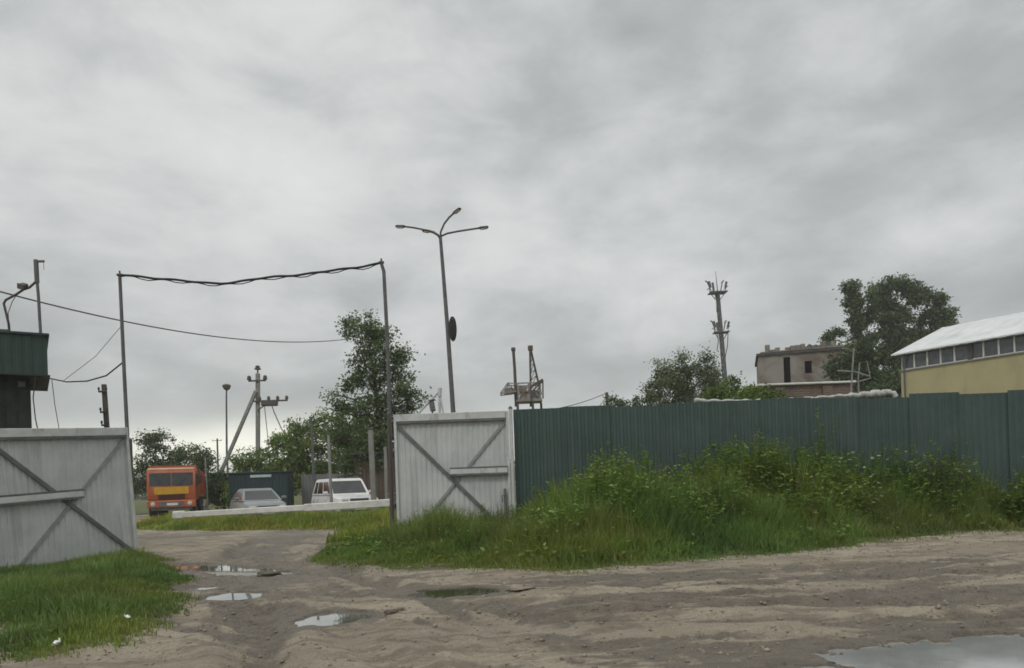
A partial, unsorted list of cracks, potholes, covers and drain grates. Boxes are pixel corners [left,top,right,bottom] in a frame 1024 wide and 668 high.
pothole [195,590,279,603]
pothole [163,560,332,582]
pothole [655,627,1024,668]
pothole [285,606,388,631]
pothole [384,584,513,603]
